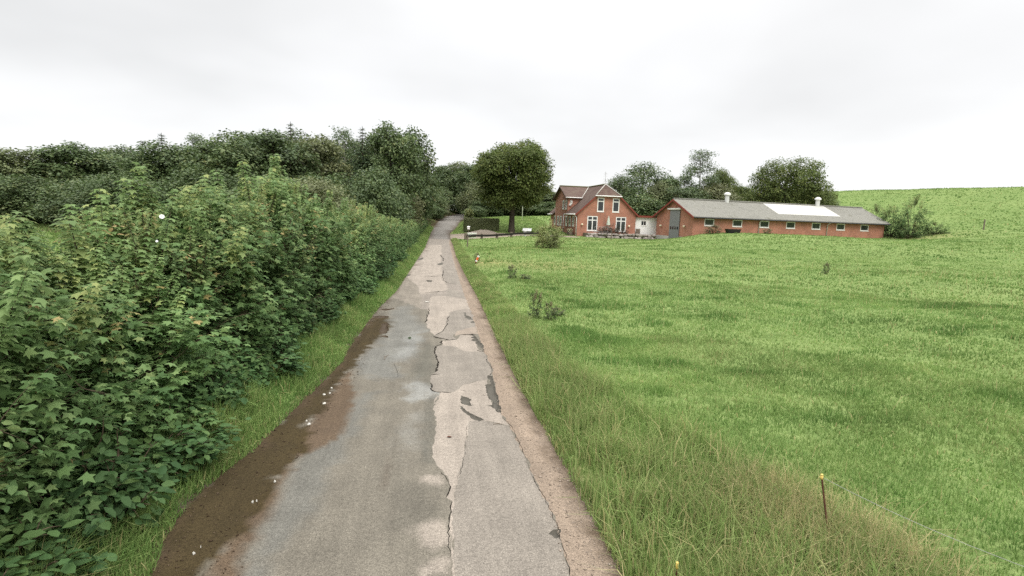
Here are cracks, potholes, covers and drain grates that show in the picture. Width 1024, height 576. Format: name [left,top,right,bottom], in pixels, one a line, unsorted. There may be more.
pothole [485,375,501,413]
crack [441,472,452,557]
